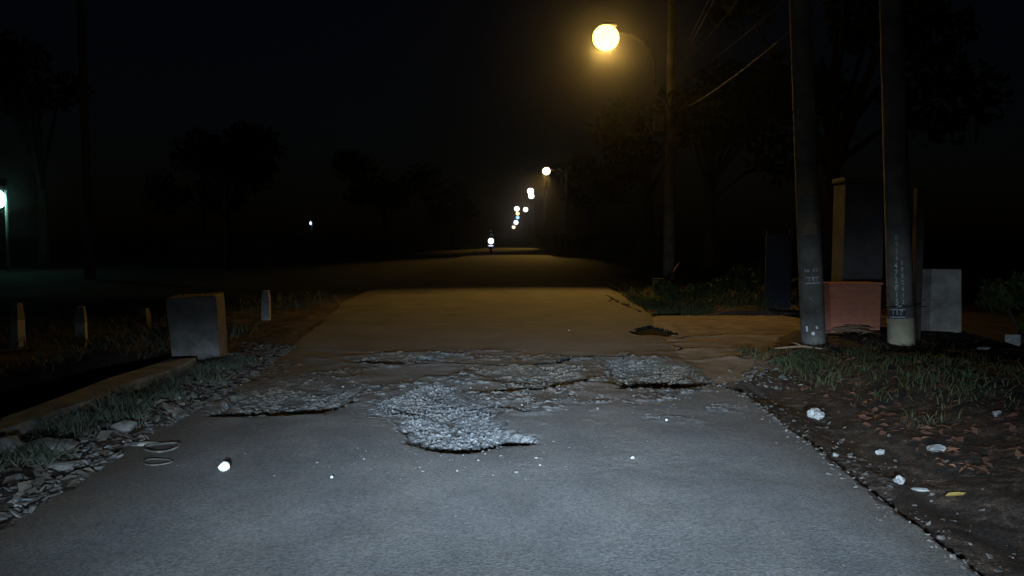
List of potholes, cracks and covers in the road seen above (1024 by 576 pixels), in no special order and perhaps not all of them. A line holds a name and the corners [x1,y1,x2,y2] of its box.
pothole [596,356,713,389]
pothole [455,359,597,392]
pothole [204,375,364,417]
pothole [353,383,540,454]
pothole [630,325,679,337]
crack [606,295,642,312]
